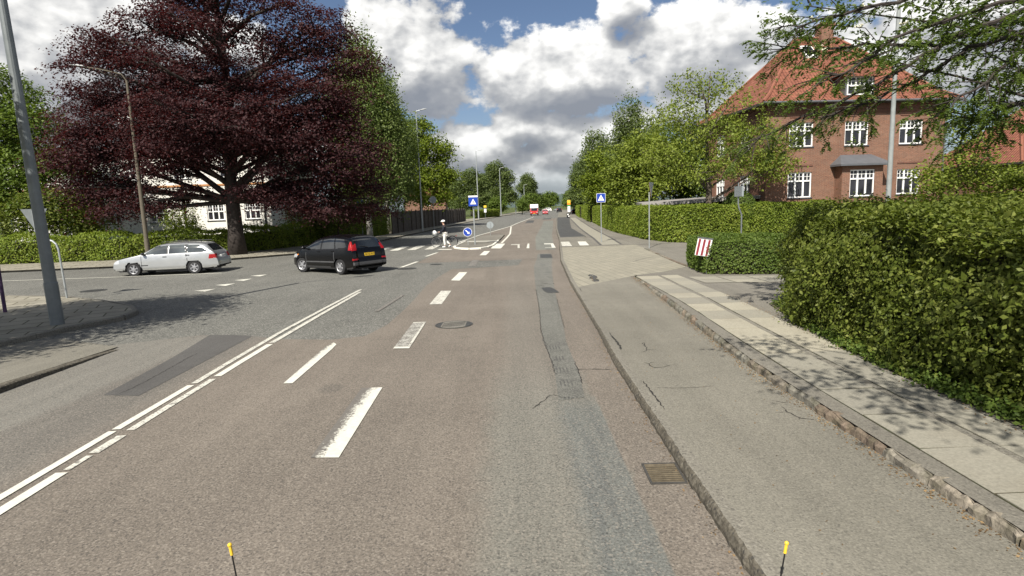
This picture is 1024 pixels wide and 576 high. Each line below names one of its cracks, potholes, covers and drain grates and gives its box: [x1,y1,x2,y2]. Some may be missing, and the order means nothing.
manhole cover [435,321,473,329]
drain grate [641,462,688,485]
